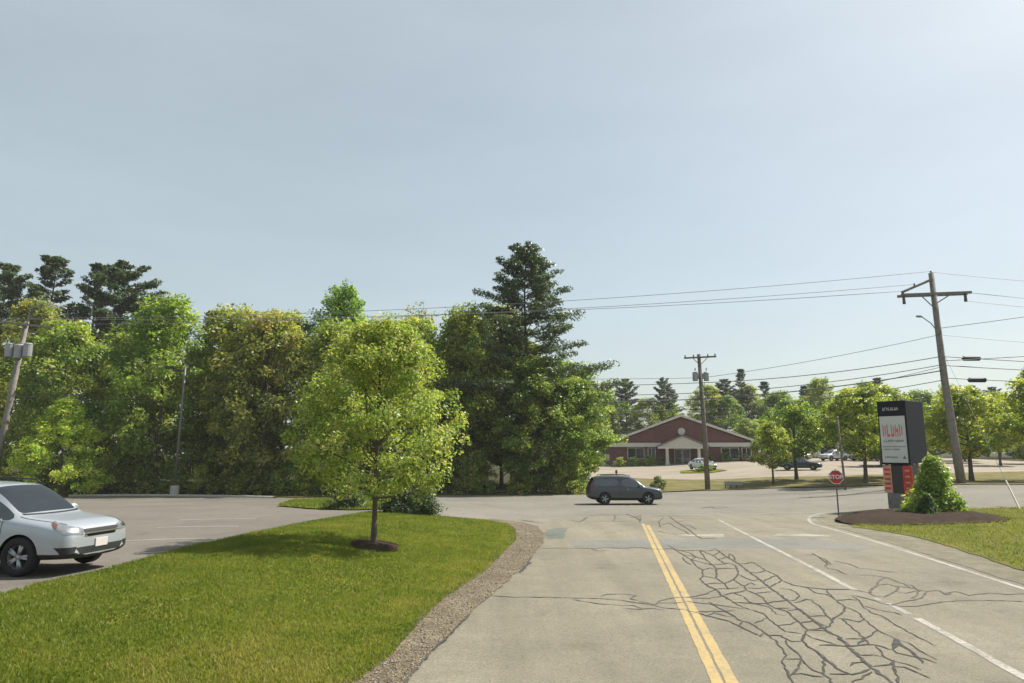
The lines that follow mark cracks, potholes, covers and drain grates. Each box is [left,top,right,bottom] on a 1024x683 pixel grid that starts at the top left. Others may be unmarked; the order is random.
crack [493,514,1024,683]
